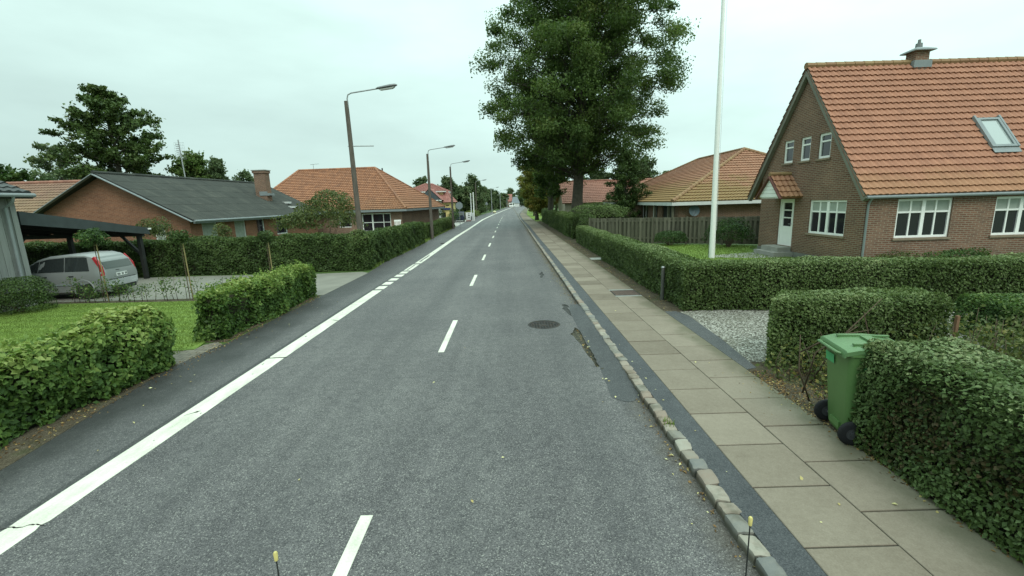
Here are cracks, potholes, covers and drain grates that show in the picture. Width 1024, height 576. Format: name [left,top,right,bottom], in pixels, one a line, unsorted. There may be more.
pothole [571,328,600,367]
utility cover [609,289,642,297]
manhole cover [528,320,560,329]
